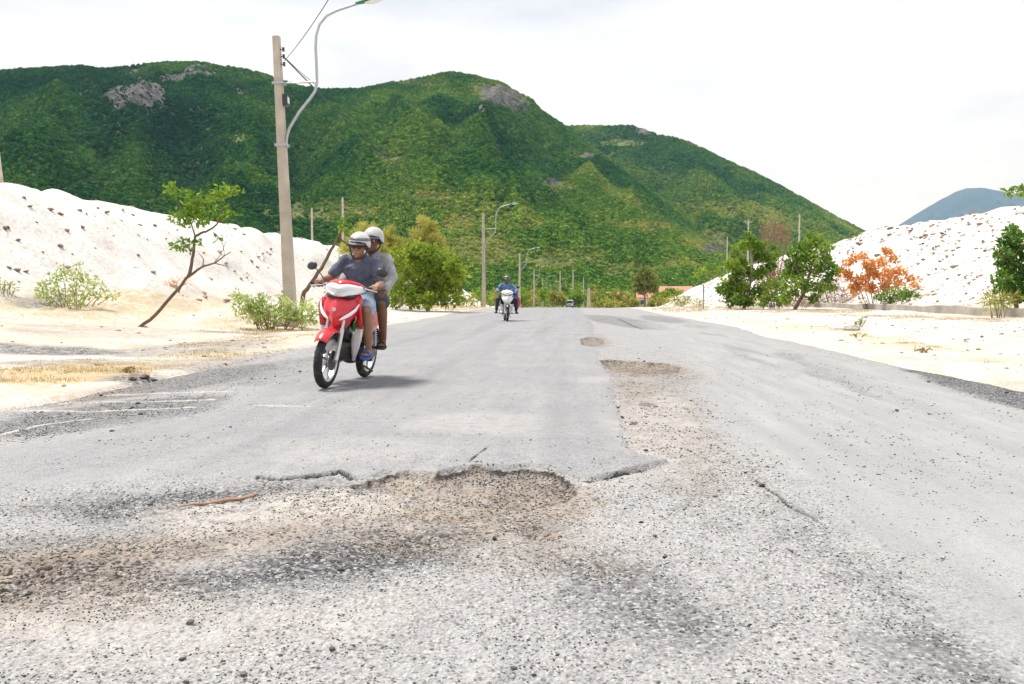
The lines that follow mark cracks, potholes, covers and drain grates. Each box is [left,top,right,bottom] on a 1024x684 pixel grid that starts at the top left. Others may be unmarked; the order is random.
pothole [367,530,442,559]
pothole [506,523,567,544]
pothole [579,337,604,347]
crack [752,478,816,521]
pothole [600,360,681,375]
pothole [350,483,375,494]
pothole [366,465,577,510]
crack [256,470,360,482]
